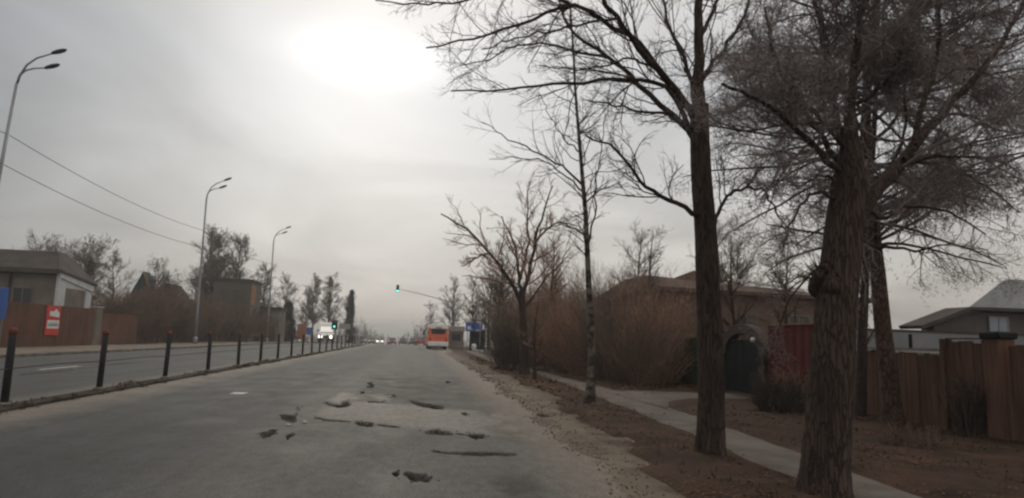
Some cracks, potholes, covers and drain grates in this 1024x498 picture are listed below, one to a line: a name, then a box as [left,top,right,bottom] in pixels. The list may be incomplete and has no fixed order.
pothole [466,432,489,440]
pothole [277,406,303,423]
pothole [409,400,446,410]
pothole [420,428,458,436]
pothole [398,469,440,483]
pothole [257,429,279,439]
